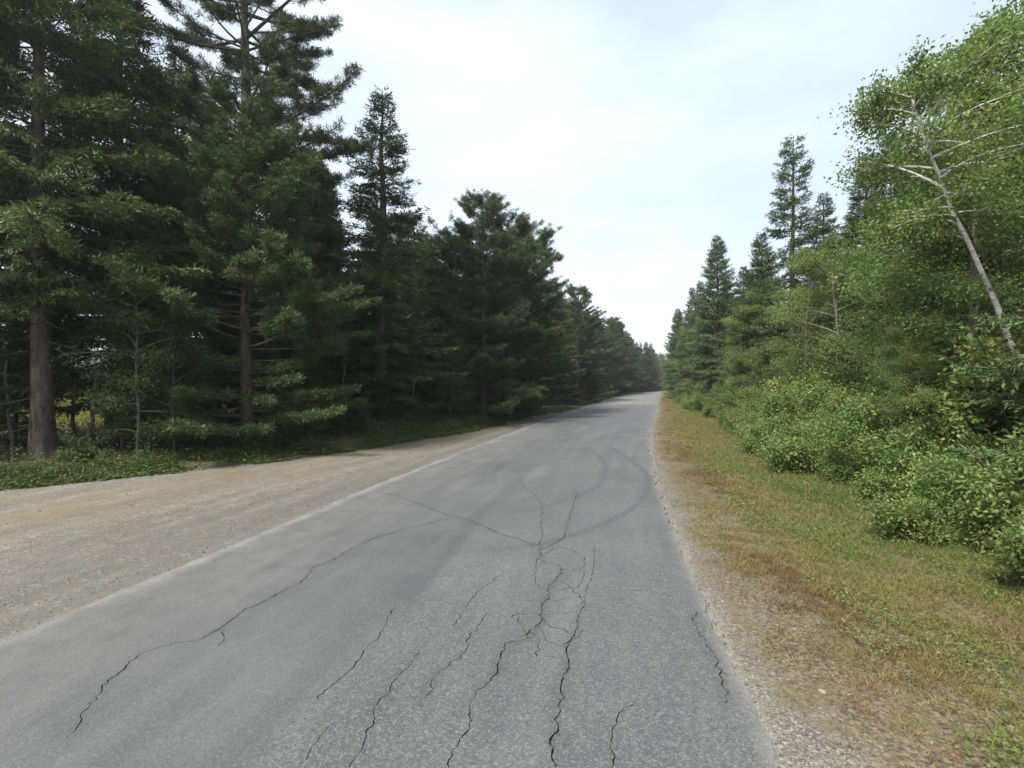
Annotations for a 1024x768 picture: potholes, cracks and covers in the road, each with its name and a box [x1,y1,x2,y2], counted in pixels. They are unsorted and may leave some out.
crack [610,699,637,768]
crack [68,482,596,768]
crack [692,612,728,702]
